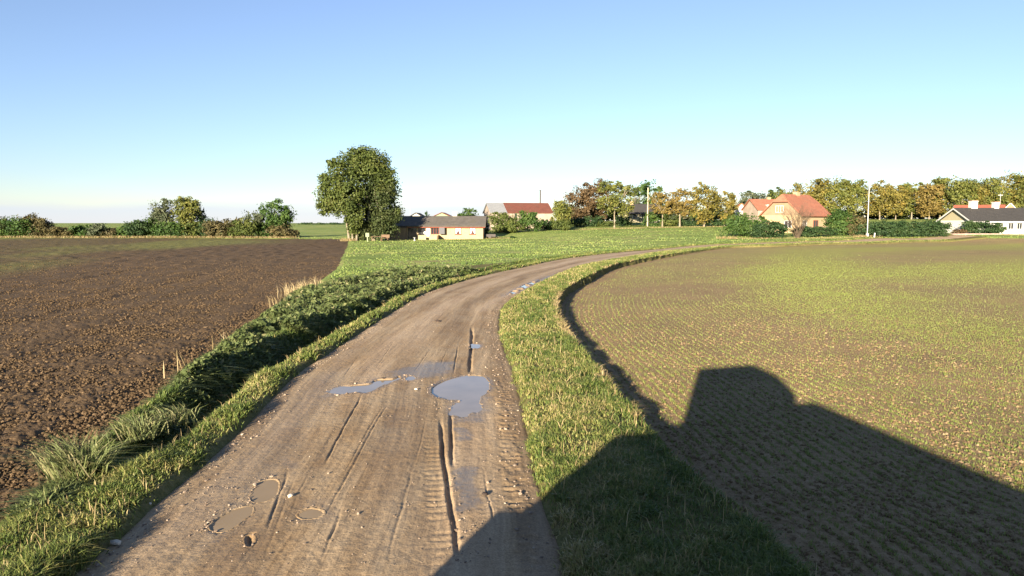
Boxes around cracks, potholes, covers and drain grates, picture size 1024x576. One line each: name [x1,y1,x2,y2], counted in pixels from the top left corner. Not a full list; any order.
pothole [430,375,492,418]
pothole [208,505,255,534]
pothole [295,507,327,520]
pothole [327,375,402,395]
pothole [248,478,281,503]
